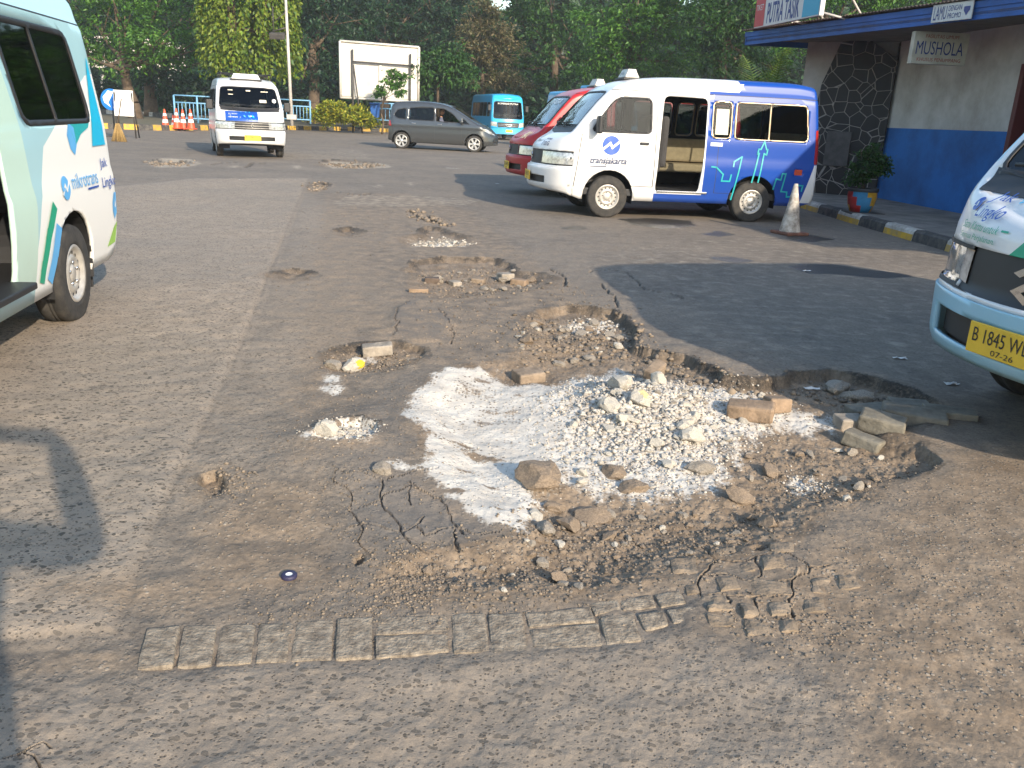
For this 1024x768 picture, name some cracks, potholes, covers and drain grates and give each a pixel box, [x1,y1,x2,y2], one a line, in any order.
pothole [263,268,319,284]
pothole [401,255,563,301]
pothole [371,304,944,605]
pothole [331,227,367,238]
pothole [306,181,332,194]
pothole [314,340,429,376]
pothole [319,159,387,170]
pothole [142,158,197,168]
crack [589,268,683,309]
pothole [302,415,382,443]
pothole [394,225,484,248]
